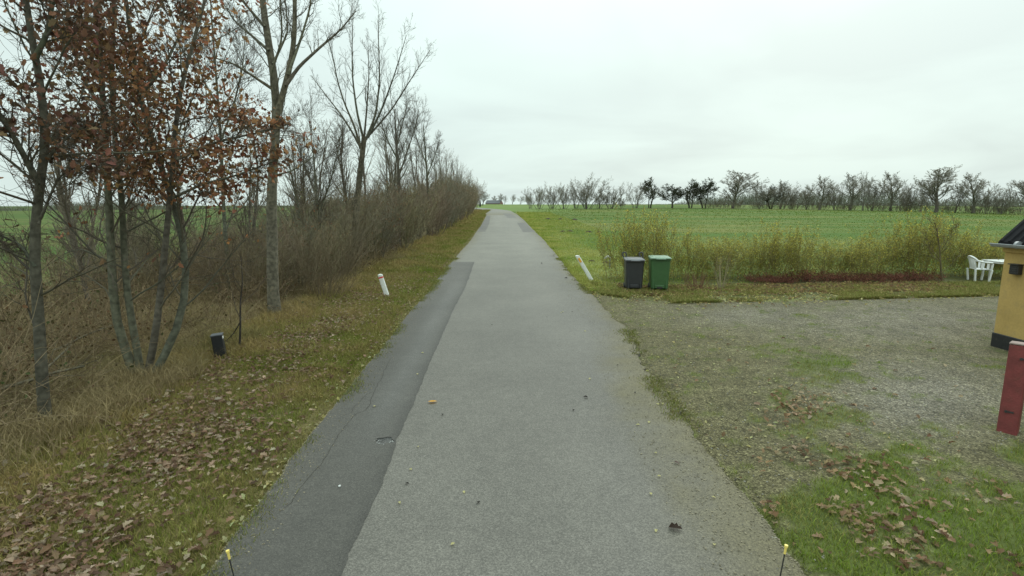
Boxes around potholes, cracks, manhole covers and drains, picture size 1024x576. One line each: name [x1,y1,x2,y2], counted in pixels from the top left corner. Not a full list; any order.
crack [281,366,387,511]
